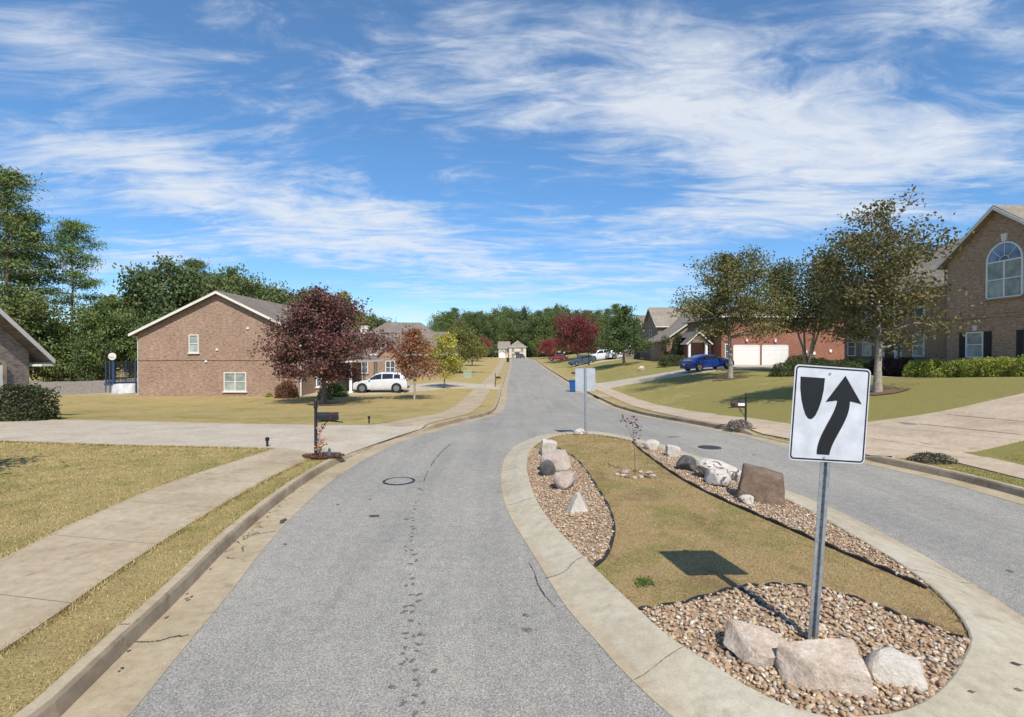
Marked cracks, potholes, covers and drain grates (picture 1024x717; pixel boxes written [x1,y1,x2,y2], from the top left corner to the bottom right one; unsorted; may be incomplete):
manhole cover [382,477,415,485]
